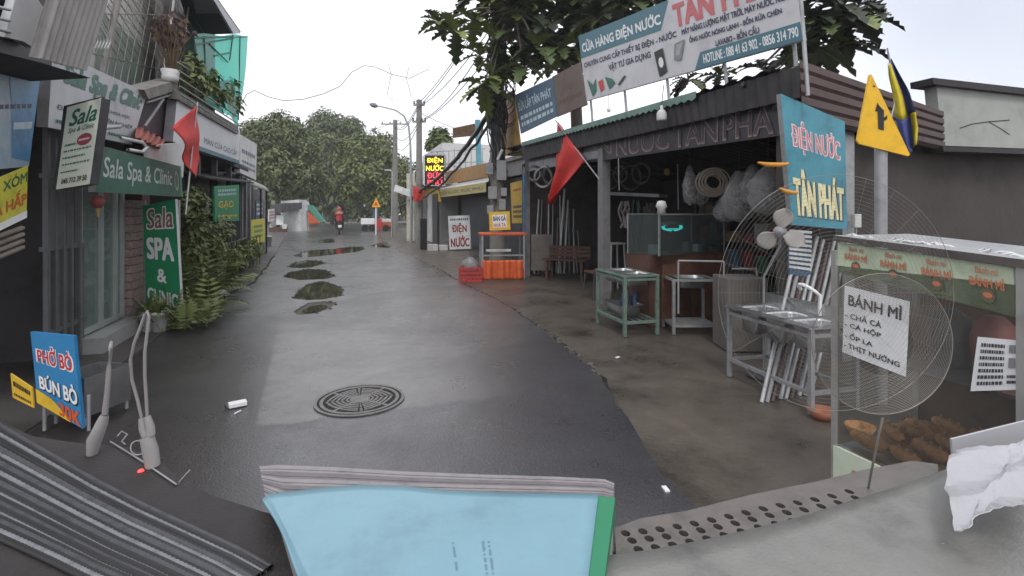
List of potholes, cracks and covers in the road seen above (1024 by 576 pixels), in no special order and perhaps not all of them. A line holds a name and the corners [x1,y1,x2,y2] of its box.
manhole cover [313,384,405,417]
pothole [283,269,335,280]
pothole [287,260,325,268]
pothole [293,246,364,258]
pothole [291,281,344,300]
pothole [294,301,337,315]
